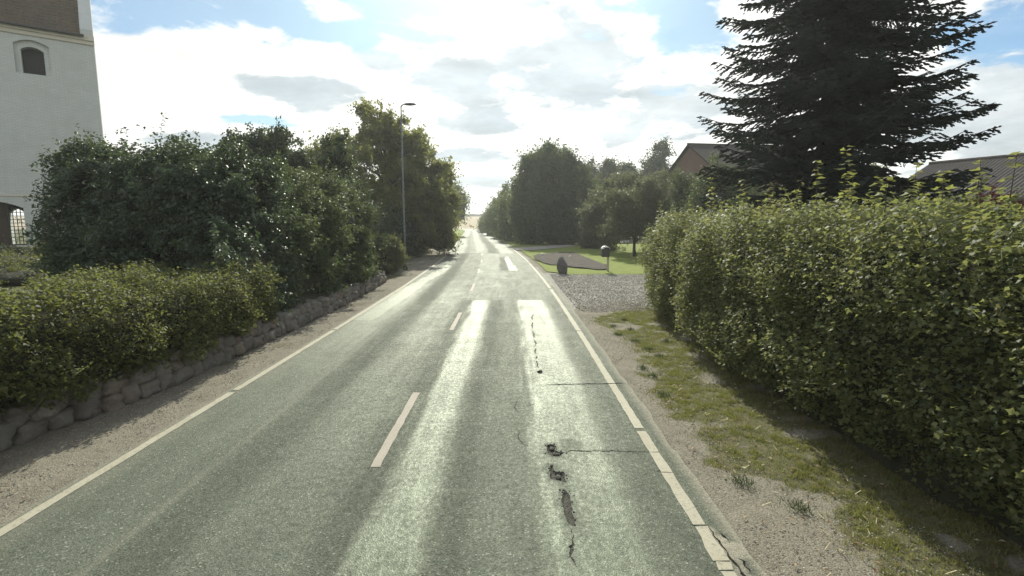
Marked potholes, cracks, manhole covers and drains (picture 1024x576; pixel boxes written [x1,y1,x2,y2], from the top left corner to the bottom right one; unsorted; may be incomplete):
crack [690,524,752,576]
pothole [558,489,576,526]
crack [568,529,577,567]
pothole [545,463,568,482]
pothole [545,443,567,456]
